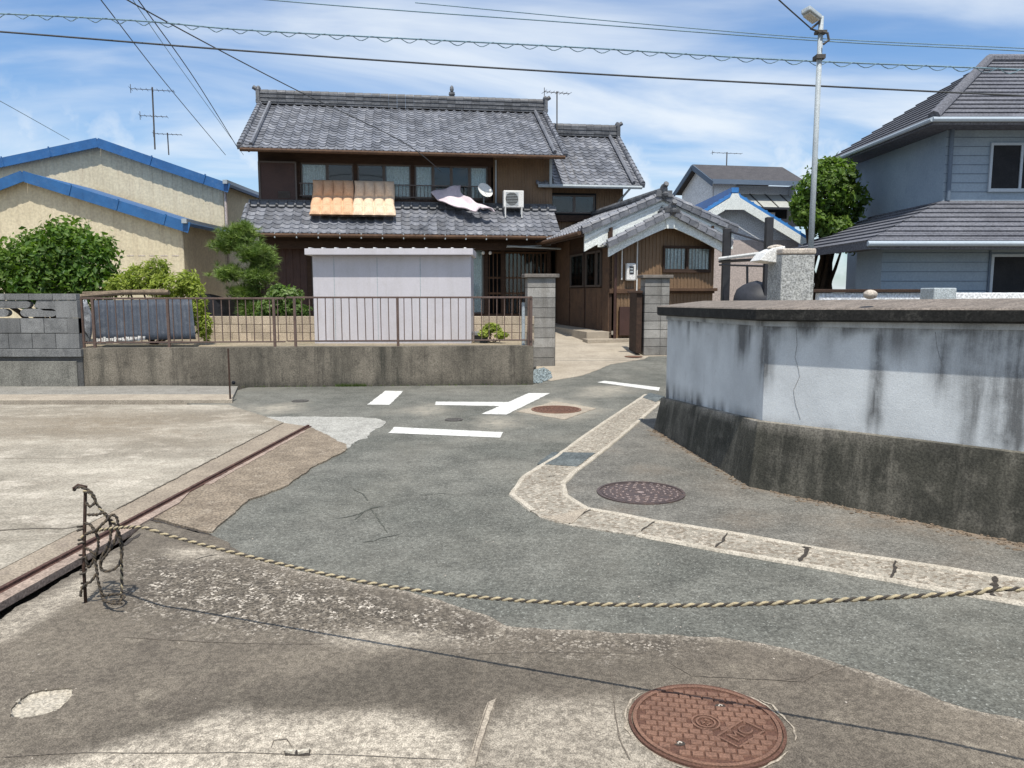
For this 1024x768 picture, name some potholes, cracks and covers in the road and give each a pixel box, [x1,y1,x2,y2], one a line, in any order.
crack [672,664,847,682]
manhole cover [597,481,686,505]
crack [336,488,398,542]
manhole cover [624,684,797,768]
manhole cover [516,401,596,420]
